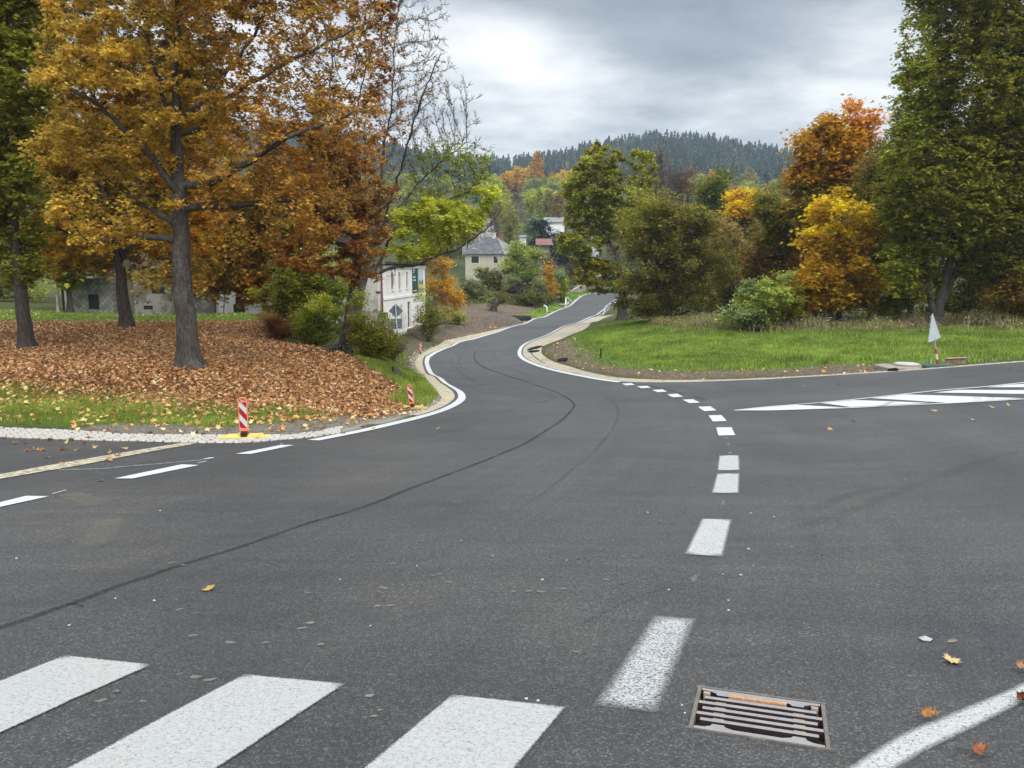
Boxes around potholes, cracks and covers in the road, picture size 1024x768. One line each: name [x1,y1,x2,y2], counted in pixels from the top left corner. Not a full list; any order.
manhole cover [873,362,922,370]
drain grate [685,685,834,752]
